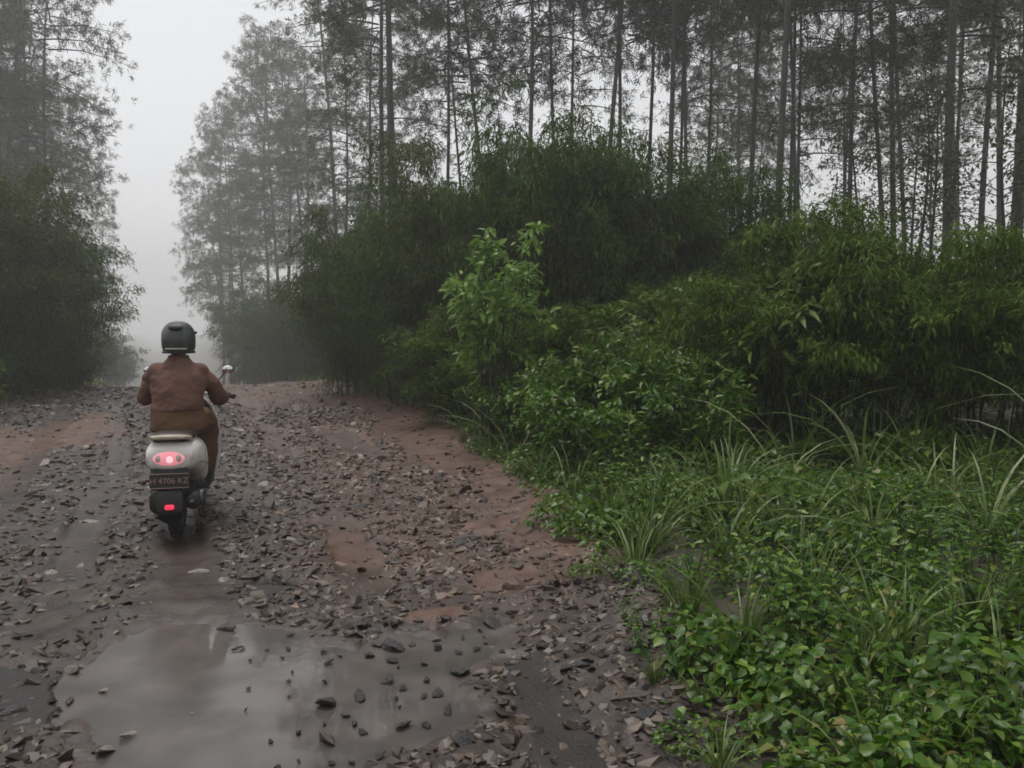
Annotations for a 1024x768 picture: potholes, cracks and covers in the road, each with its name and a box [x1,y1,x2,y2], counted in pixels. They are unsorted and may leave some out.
pothole [51,612,519,768]
